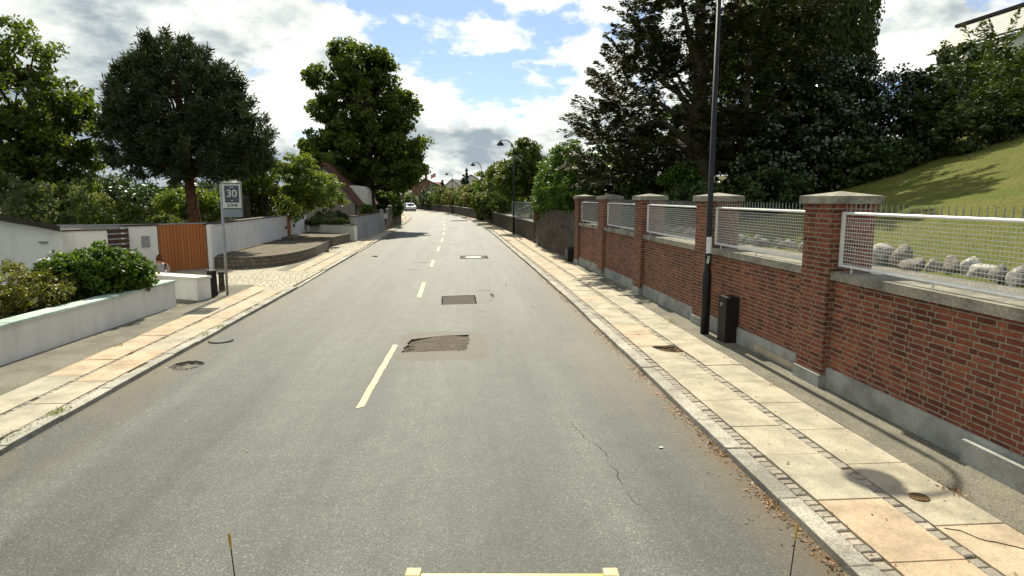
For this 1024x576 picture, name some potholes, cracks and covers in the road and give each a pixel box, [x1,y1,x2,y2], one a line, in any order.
utility cover [908,492,930,502]
pothole [401,335,470,353]
crack [944,528,1024,549]
